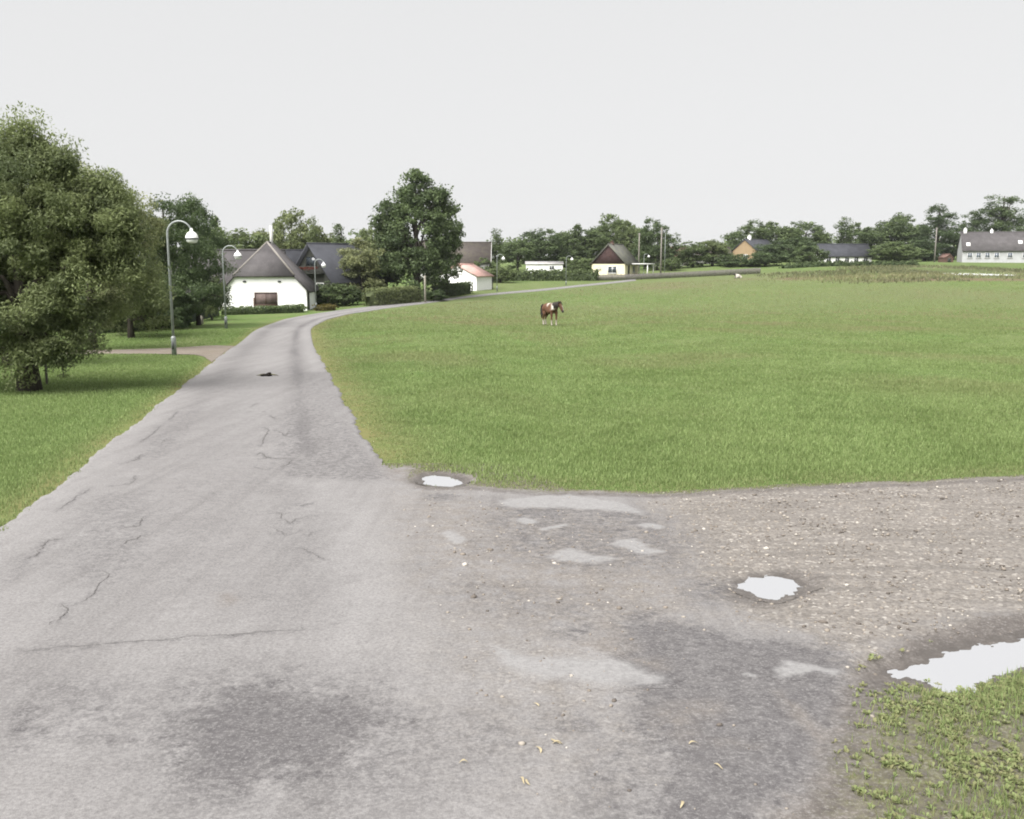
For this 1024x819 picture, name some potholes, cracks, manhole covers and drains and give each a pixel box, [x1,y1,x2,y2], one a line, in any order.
pothole [716,568,826,604]
pothole [408,472,475,487]
pothole [862,629,1024,698]
crack [35,626,315,650]
